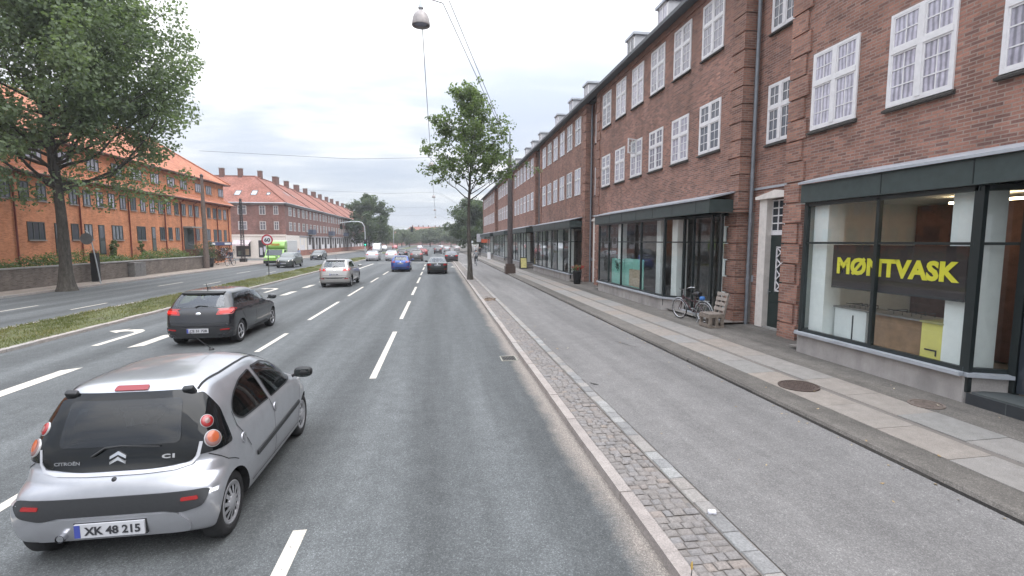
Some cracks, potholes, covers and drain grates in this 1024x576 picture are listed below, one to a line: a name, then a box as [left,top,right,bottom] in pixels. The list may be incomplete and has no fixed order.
manhole cover [778,380,820,392]
manhole cover [907,399,946,410]
